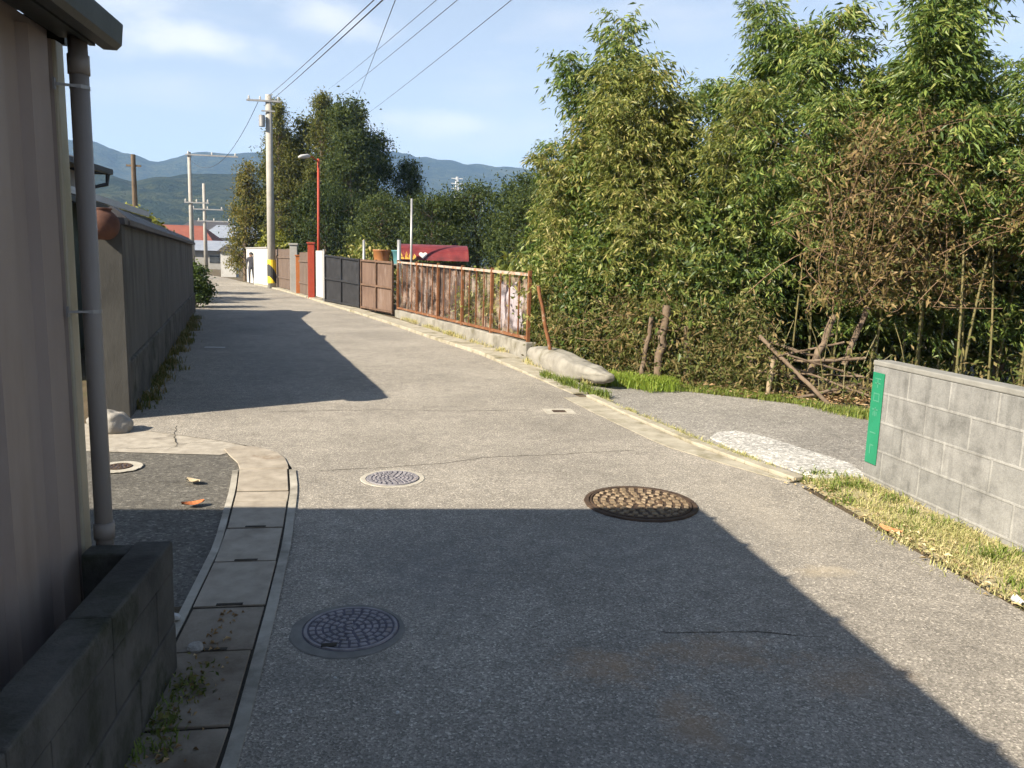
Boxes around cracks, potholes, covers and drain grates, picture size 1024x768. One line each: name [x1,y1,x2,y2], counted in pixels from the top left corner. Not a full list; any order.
crack [309,450,629,472]
crack [645,630,829,638]
manhole cover [360,470,425,488]
manhole cover [584,486,699,523]
manhole cover [110,461,144,473]
manhole cover [288,605,406,659]
